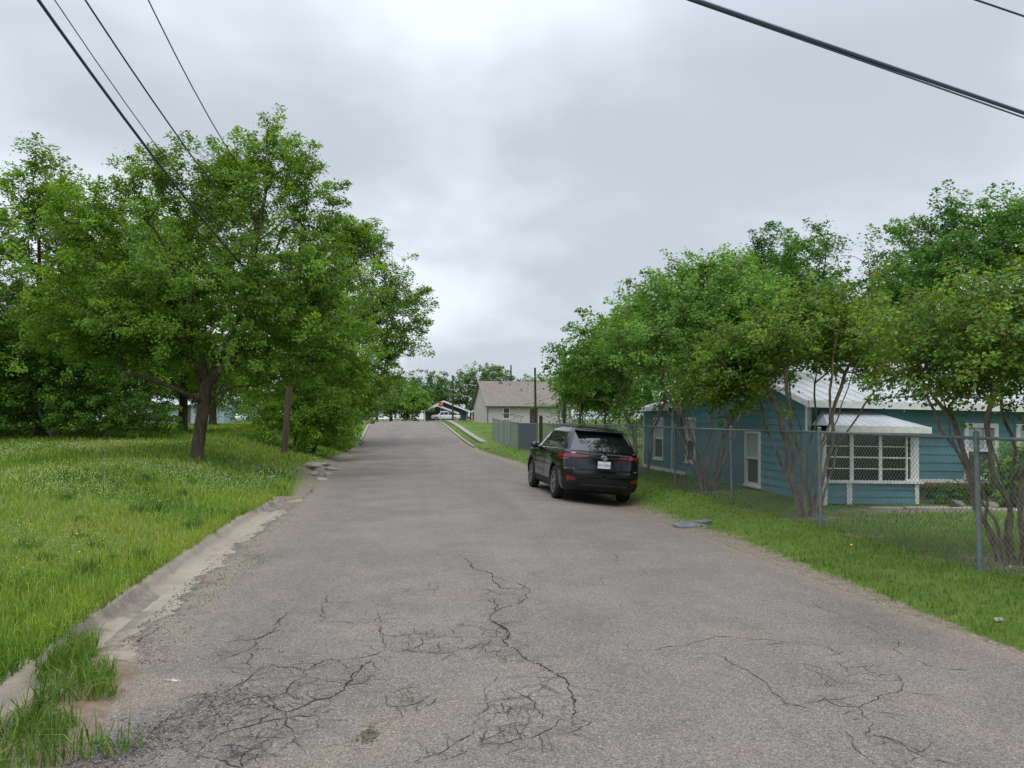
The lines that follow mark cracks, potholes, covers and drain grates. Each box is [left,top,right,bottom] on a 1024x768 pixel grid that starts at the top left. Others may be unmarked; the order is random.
crack [623,606,992,765]
crack [303,544,601,763]
crack [94,610,426,768]
pothole [356,726,380,745]
